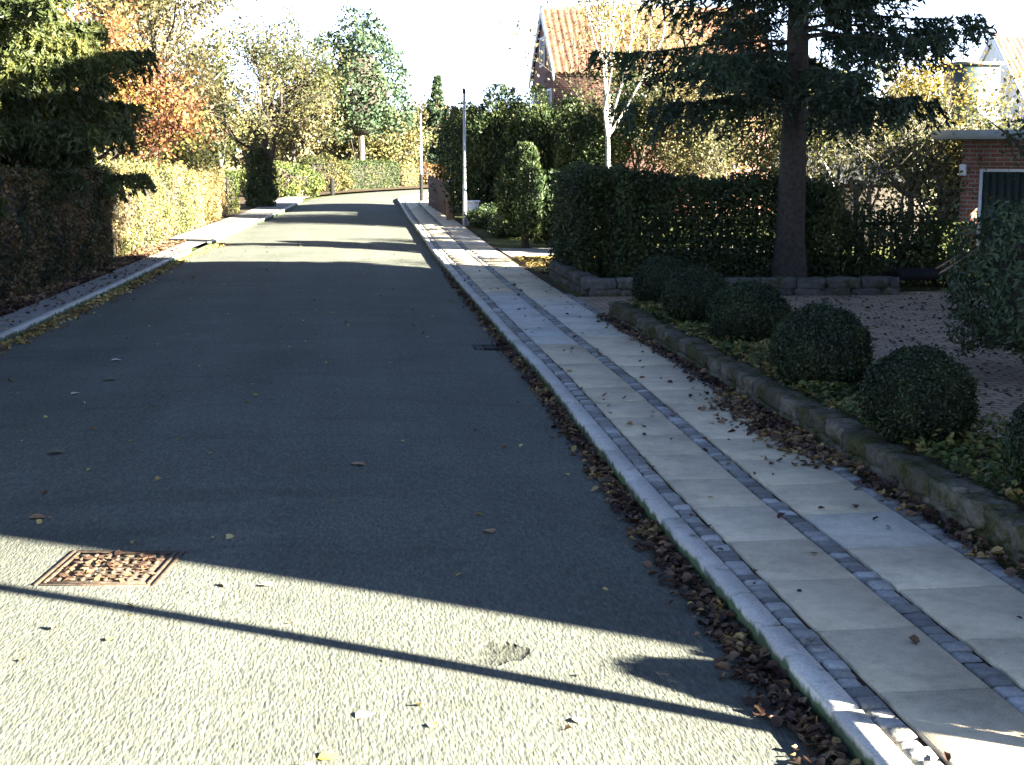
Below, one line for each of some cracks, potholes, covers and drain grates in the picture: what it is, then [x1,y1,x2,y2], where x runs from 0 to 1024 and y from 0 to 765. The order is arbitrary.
pothole [471,641,530,666]
